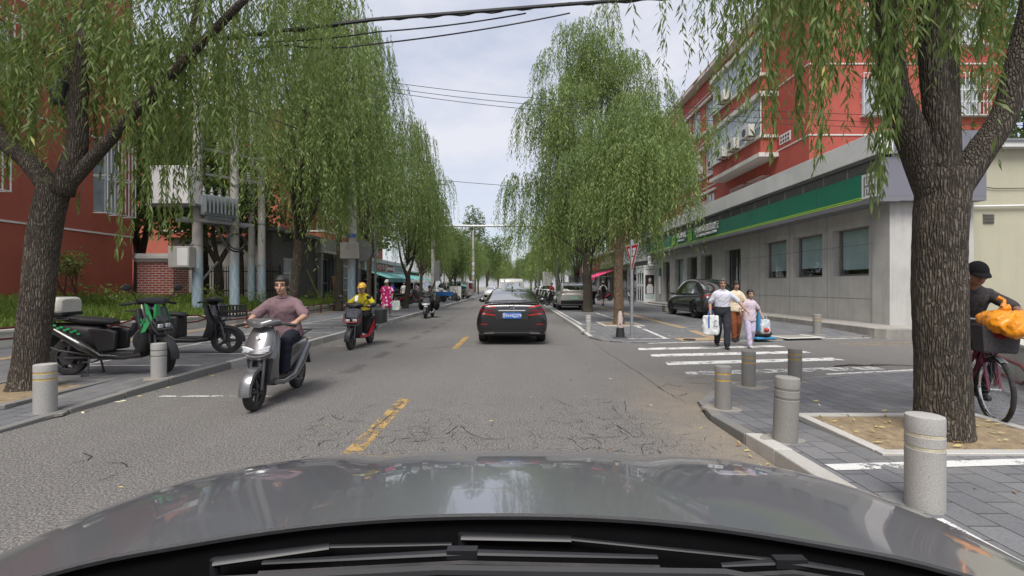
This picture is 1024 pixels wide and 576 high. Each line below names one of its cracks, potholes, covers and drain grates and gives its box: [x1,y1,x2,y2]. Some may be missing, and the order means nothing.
crack [527,397,746,457]
crack [278,402,533,458]
